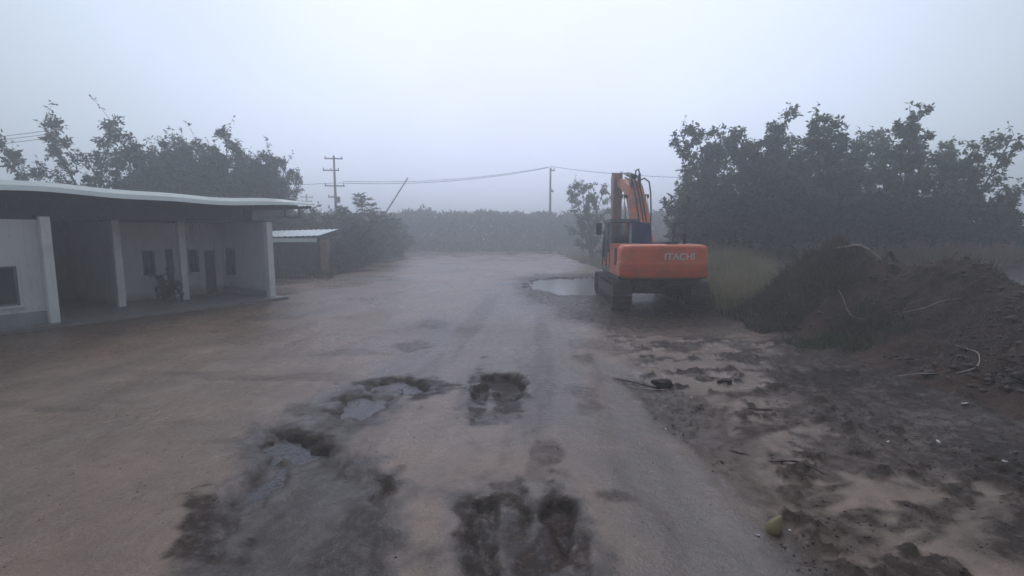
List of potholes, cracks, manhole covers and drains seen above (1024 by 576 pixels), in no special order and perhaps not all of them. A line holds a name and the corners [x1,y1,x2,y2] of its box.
pothole [521,276,598,296]
pothole [318,372,443,431]
pothole [461,368,538,425]
pothole [177,421,403,576]
pothole [433,485,613,576]
